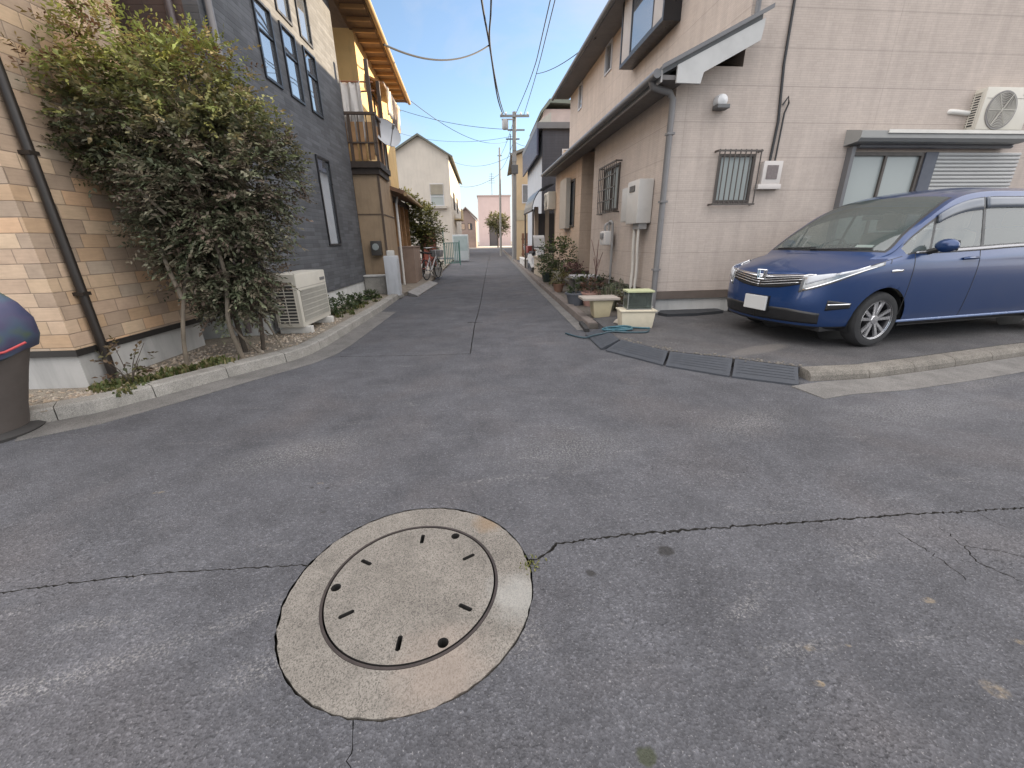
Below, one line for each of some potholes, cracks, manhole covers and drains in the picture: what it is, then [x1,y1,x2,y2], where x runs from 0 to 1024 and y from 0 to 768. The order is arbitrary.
manhole cover [276,508,533,722]
crack [0,564,308,594]
crack [529,507,1024,582]
crack [346,720,354,768]
